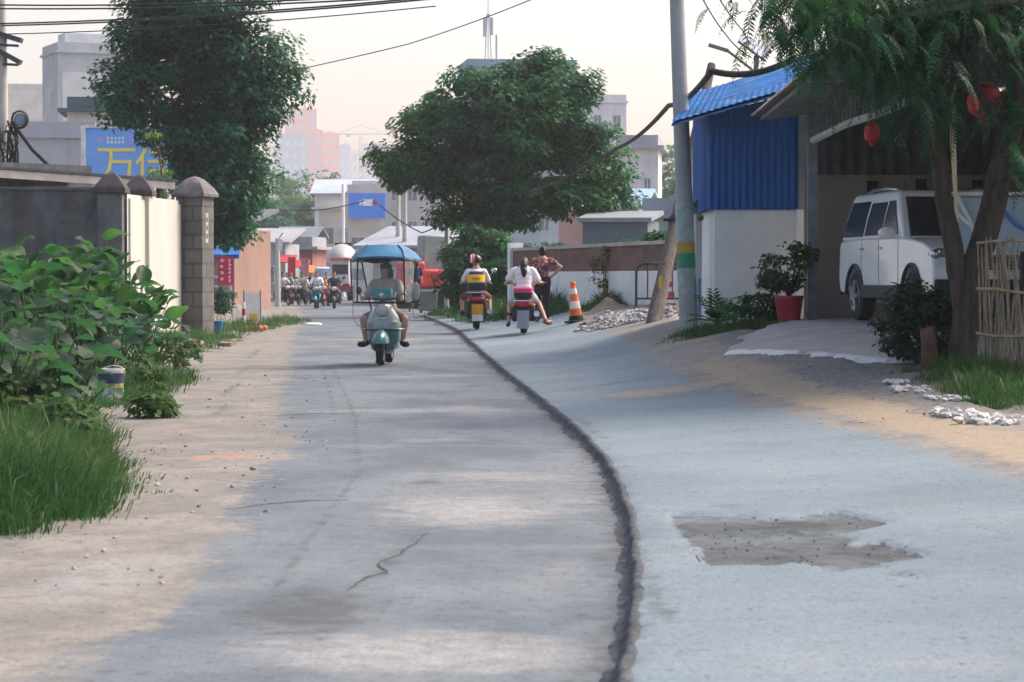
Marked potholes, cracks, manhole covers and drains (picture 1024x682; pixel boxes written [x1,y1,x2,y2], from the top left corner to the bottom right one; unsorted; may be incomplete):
pothole [669,511,934,581]
crack [347,315,645,682]
crack [227,500,334,509]
